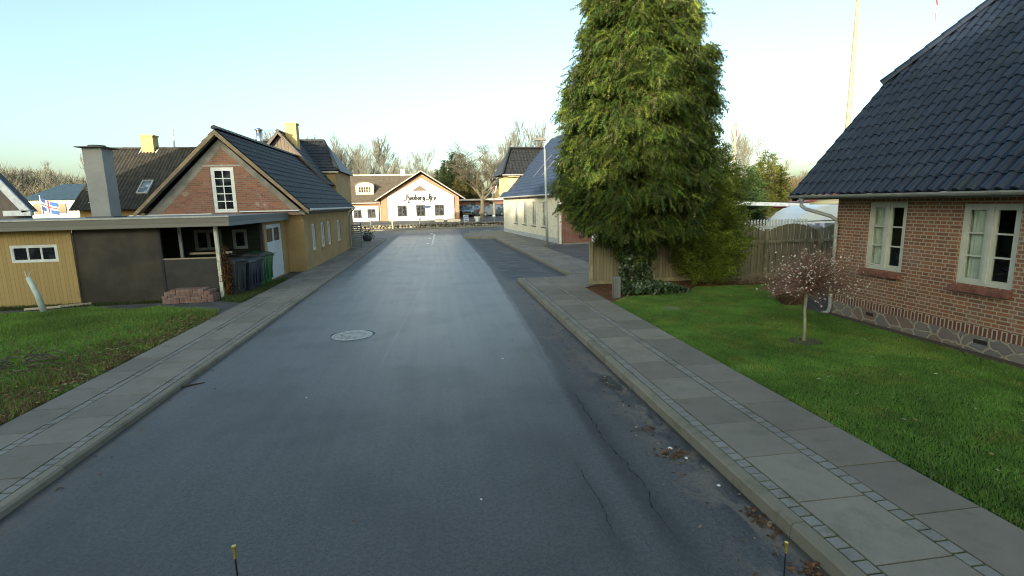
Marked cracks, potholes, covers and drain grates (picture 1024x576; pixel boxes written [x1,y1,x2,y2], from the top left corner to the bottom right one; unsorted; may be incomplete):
manhole cover [330,330,375,341]
crack [573,459,622,550]
crack [576,396,670,529]
